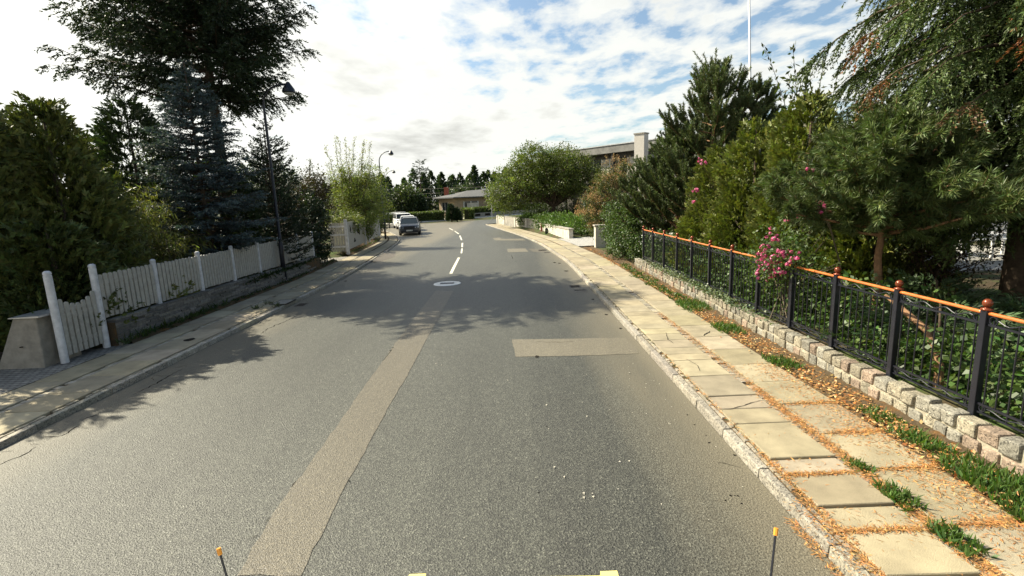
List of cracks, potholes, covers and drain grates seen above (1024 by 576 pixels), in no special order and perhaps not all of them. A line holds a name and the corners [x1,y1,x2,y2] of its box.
crack [0,414,99,465]
